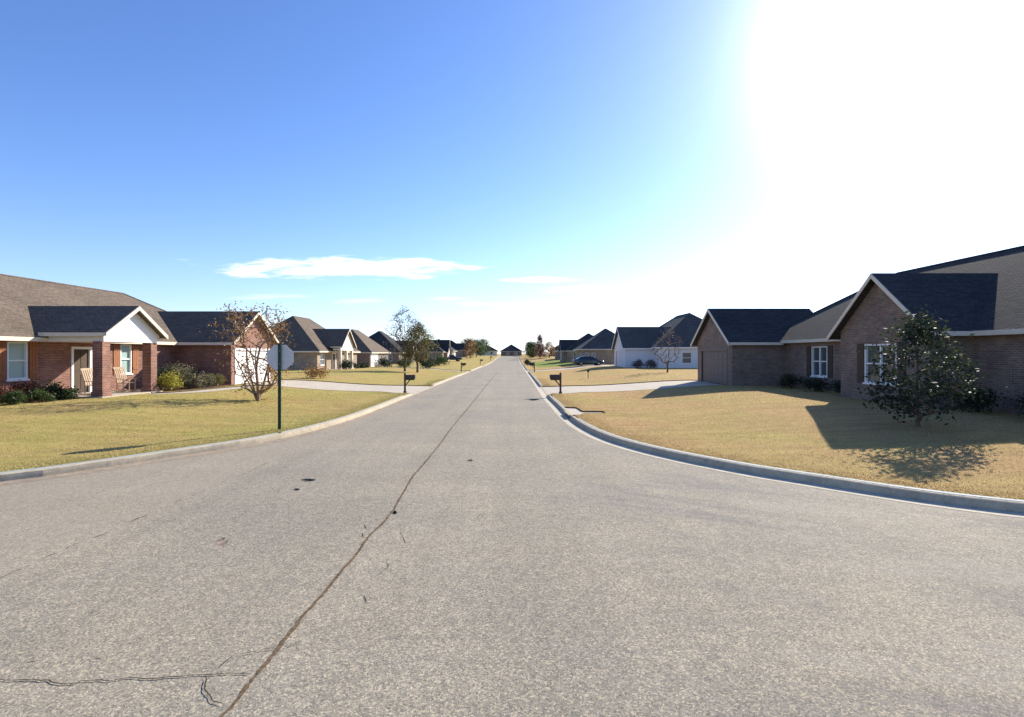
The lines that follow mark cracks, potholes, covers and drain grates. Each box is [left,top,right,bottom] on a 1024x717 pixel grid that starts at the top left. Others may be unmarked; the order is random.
crack [0,373,497,717]
